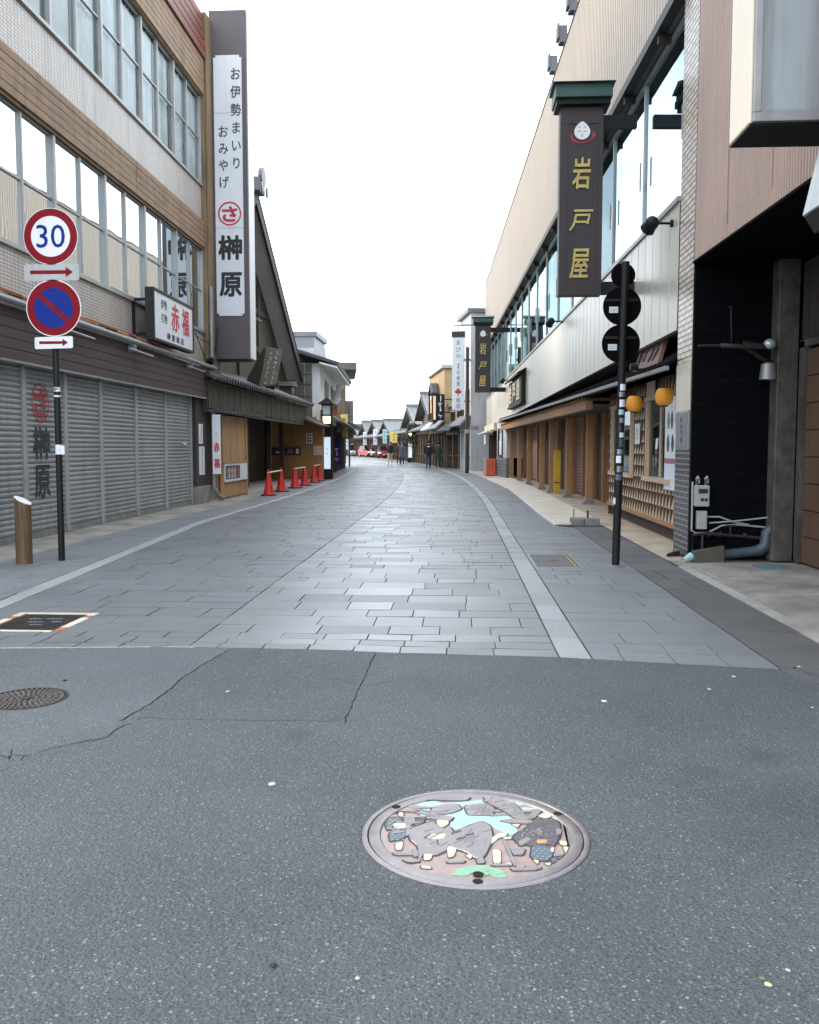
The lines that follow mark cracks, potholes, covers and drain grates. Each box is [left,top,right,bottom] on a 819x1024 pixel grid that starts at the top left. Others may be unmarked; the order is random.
manhole cover [362,789,590,890]
utility cover [0,612,99,632]
utility cover [528,554,581,567]
crack [2,650,227,771]
manhole cover [0,687,69,710]
